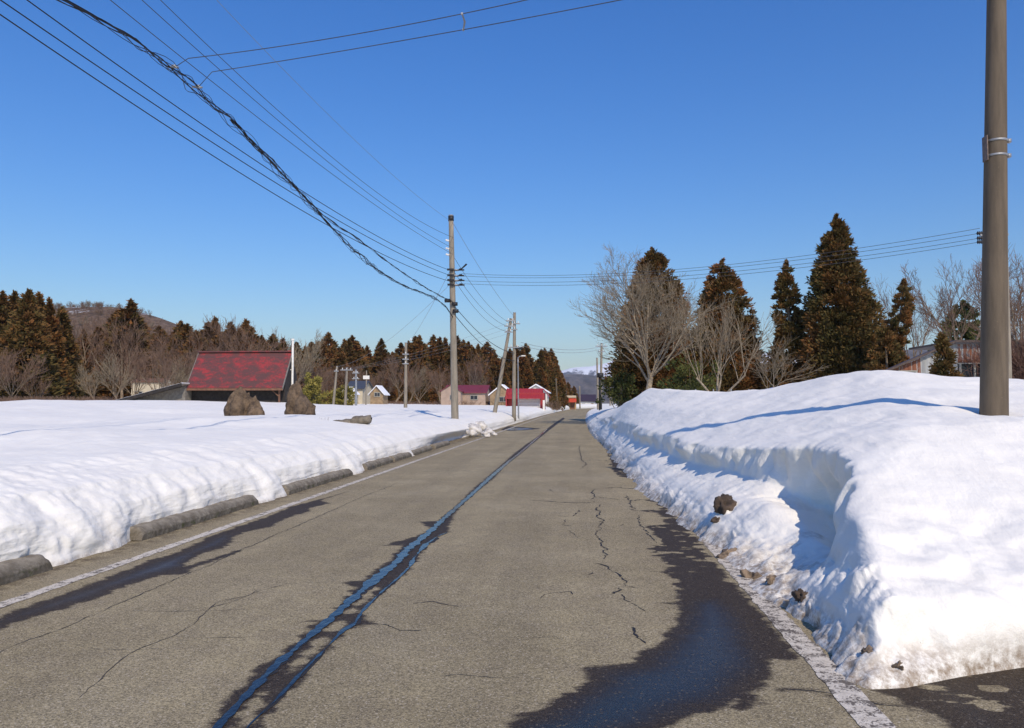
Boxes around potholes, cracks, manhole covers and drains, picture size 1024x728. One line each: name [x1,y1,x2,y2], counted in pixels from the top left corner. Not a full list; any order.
crack [541,447,657,643]
crack [0,485,392,702]
